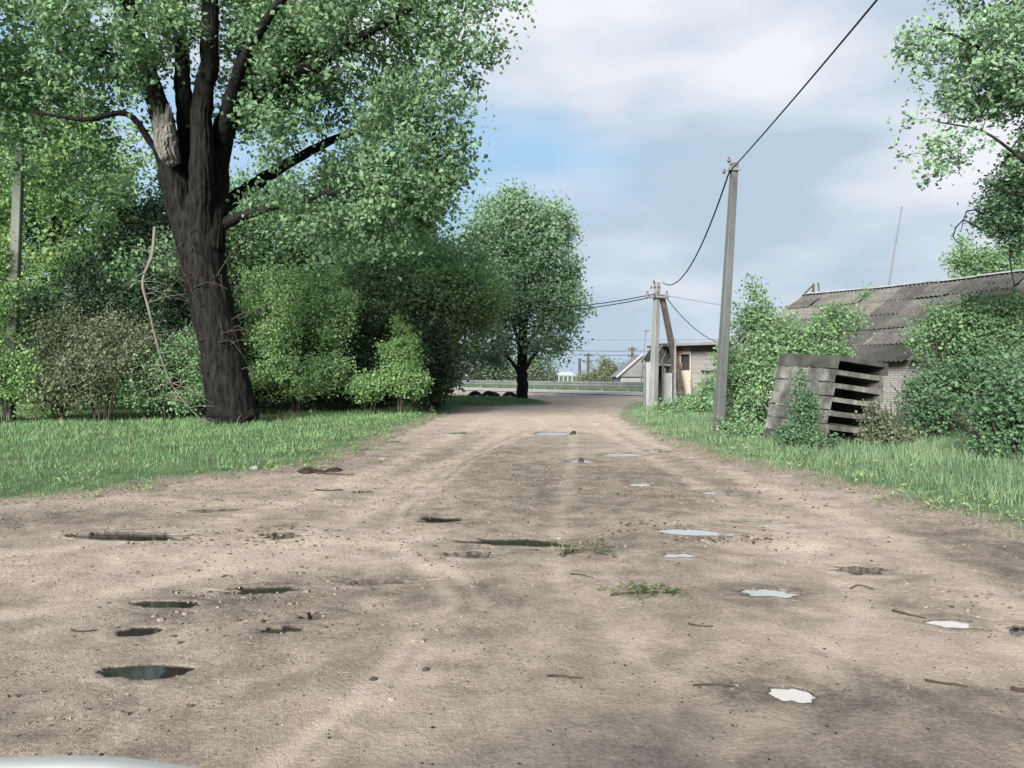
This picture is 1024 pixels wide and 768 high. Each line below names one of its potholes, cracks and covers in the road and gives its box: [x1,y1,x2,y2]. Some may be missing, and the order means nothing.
pothole [613,526,773,538]
pothole [722,583,822,602]
pothole [112,596,218,613]
pothole [902,613,1010,635]
pothole [742,678,843,713]
pothole [247,529,322,542]
pothole [427,548,518,561]
pothole [95,620,184,643]
pothole [815,562,903,578]
pothole [53,529,206,543]
pothole [444,536,591,549]
pothole [203,582,321,599]
